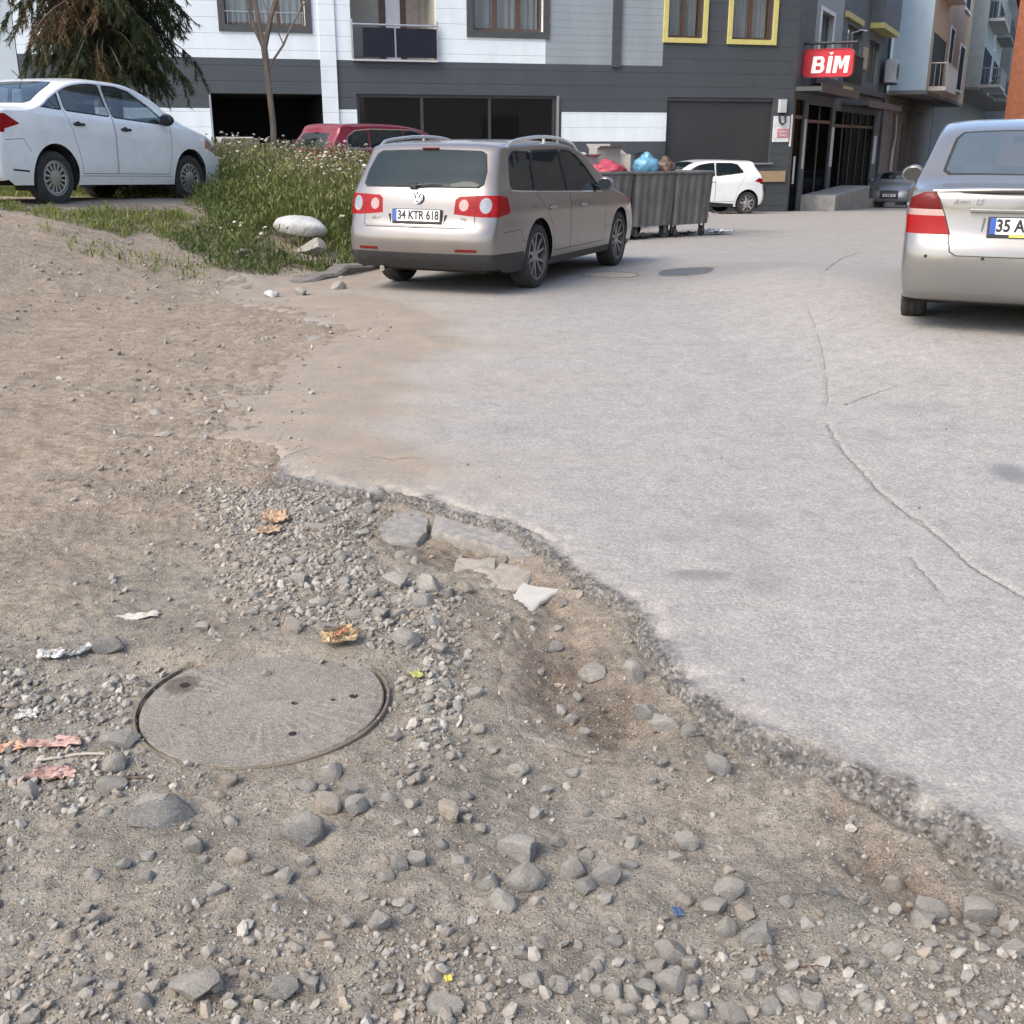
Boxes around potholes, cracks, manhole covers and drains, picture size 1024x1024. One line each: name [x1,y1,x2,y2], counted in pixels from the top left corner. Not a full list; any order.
manhole cover [132,656,390,770]
crack [805,304,828,405]
crack [827,425,1024,598]
